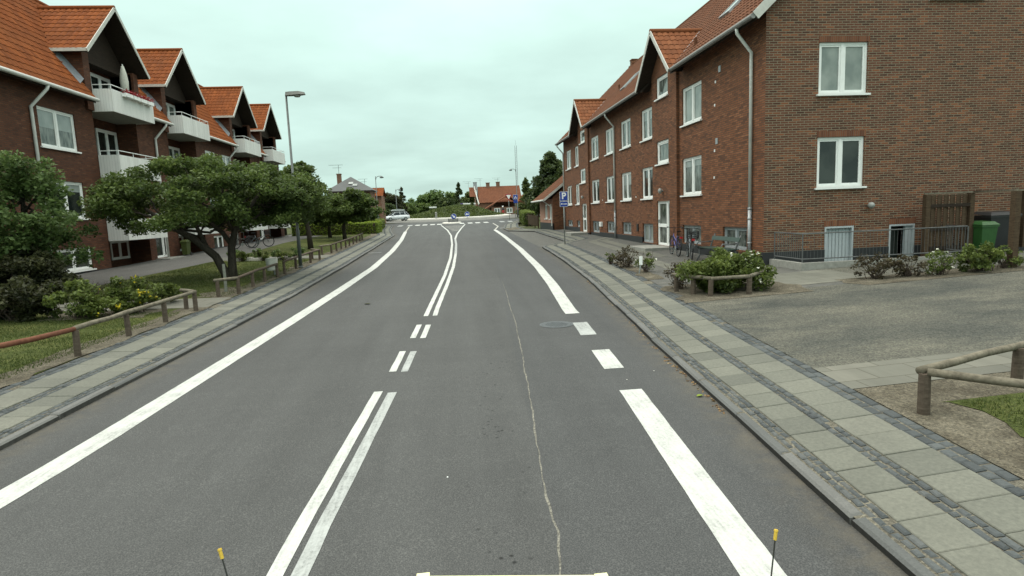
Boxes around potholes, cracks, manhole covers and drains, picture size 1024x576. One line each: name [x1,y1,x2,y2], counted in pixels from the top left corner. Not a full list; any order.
crack [502,282,561,575]
